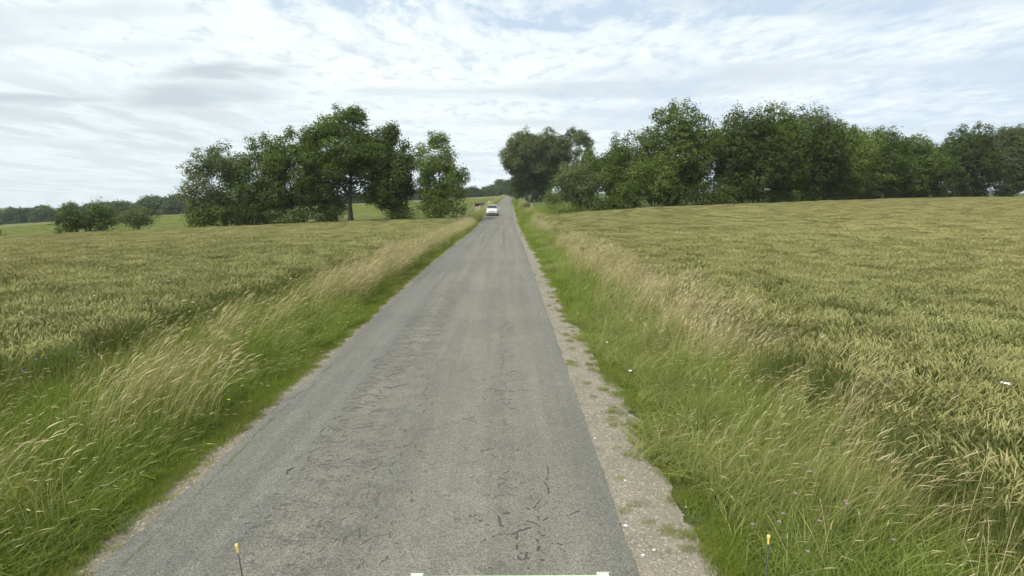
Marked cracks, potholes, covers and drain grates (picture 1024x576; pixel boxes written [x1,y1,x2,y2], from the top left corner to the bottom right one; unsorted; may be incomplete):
crack [452,321,580,569]
